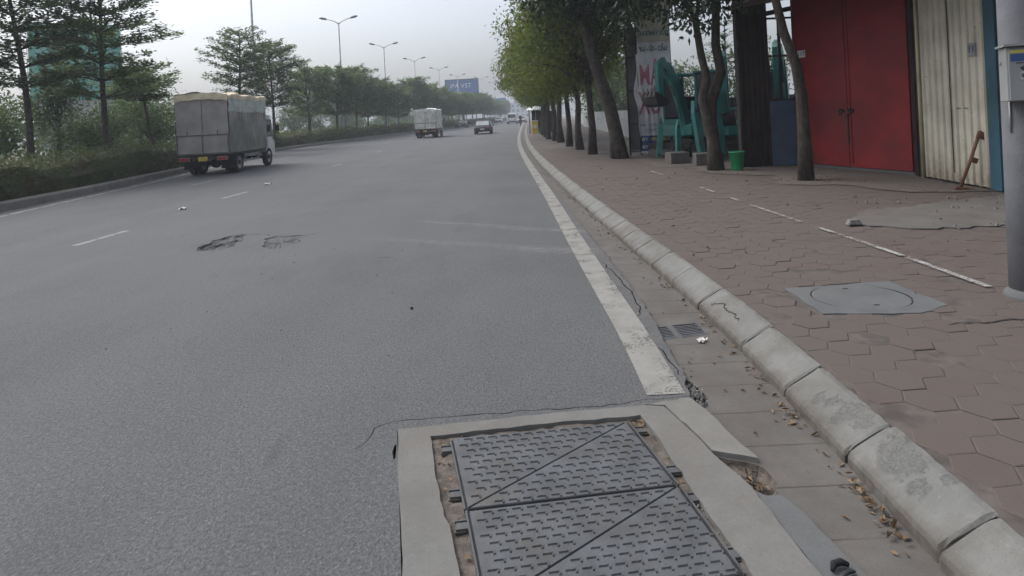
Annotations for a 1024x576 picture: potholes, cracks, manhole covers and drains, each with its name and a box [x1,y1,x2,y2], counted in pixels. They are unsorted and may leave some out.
drain grate [658,326,679,340]
pothole [197,234,251,251]
manhole cover [440,421,682,513]
pothole [261,235,305,250]
drain grate [670,322,708,338]
crack [604,263,641,316]
crack [355,396,682,459]
manhole cover [784,281,948,315]
manhole cover [453,485,746,576]
